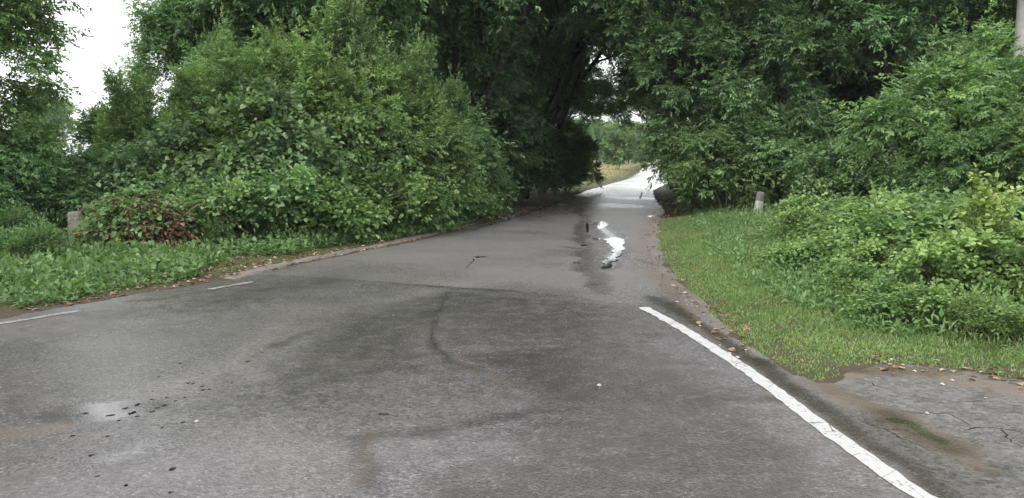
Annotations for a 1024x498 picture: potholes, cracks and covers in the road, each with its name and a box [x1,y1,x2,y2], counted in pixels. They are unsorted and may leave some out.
crack [857,398,1022,450]
